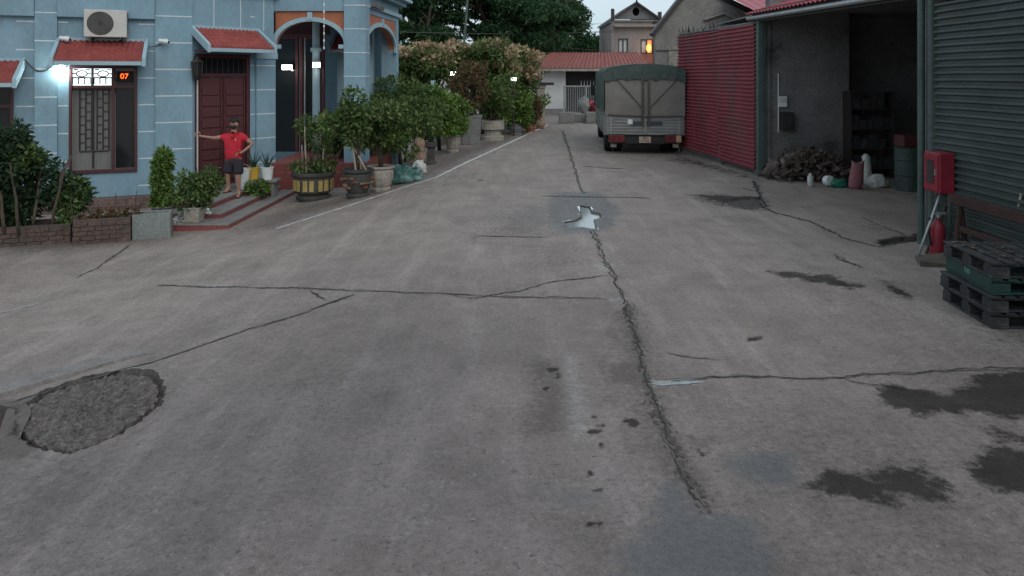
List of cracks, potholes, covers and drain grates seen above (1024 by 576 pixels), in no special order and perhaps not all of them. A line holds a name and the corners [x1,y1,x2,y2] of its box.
crack [159,130,1023,513]
pothole [561,205,608,231]
crack [78,244,131,277]
